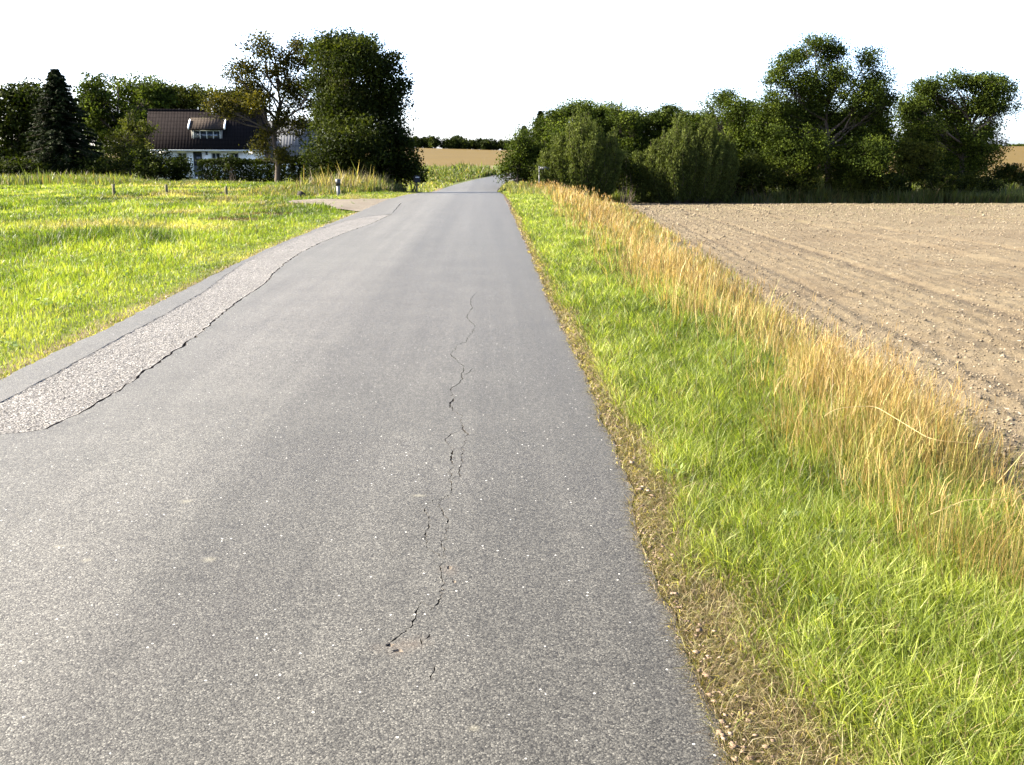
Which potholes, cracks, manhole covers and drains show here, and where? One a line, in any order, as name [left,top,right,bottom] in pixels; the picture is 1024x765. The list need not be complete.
crack [385,293,476,680]
